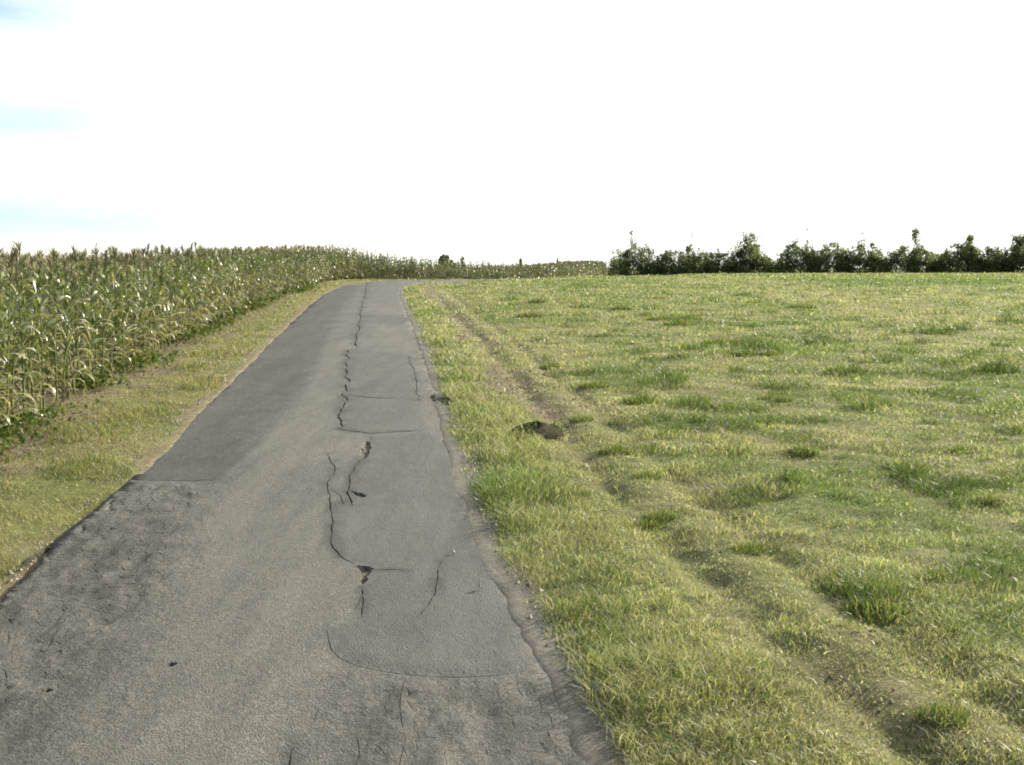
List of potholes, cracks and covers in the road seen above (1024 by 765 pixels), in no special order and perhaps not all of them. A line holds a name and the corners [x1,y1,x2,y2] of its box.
pothole [358,440,372,460]
crack [326,436,397,570]
crack [421,562,441,615]
crack [372,677,563,765]
pothole [355,565,374,586]
crack [336,282,375,429]
